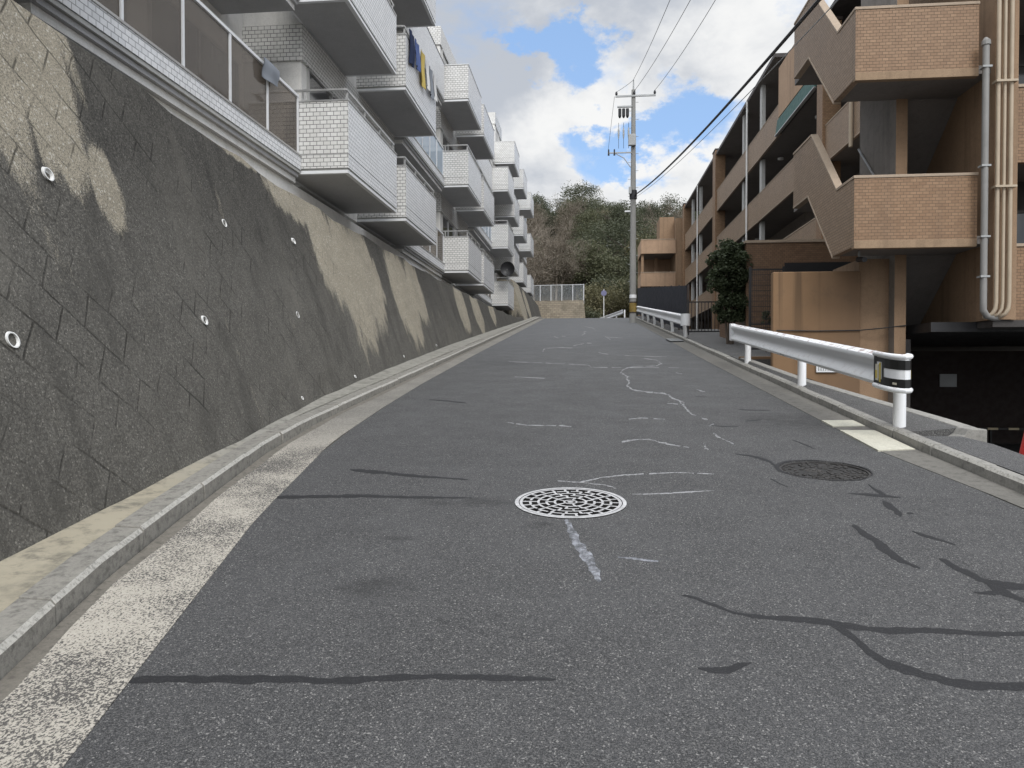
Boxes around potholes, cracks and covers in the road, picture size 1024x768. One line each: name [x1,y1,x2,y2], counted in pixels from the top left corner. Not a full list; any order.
crack [509,326,788,487]
manhole cover [774,460,873,481]
crack [558,472,714,495]
manhole cover [515,487,627,519]
